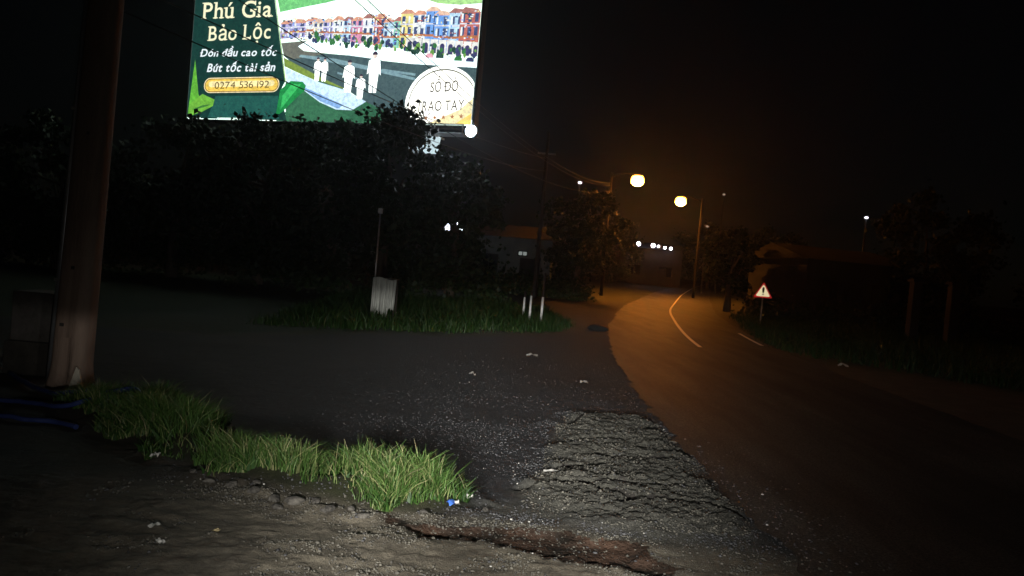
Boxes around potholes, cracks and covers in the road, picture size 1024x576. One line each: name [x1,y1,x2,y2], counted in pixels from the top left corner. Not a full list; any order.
crack [526,413,688,502]
pothole [377,510,685,576]
